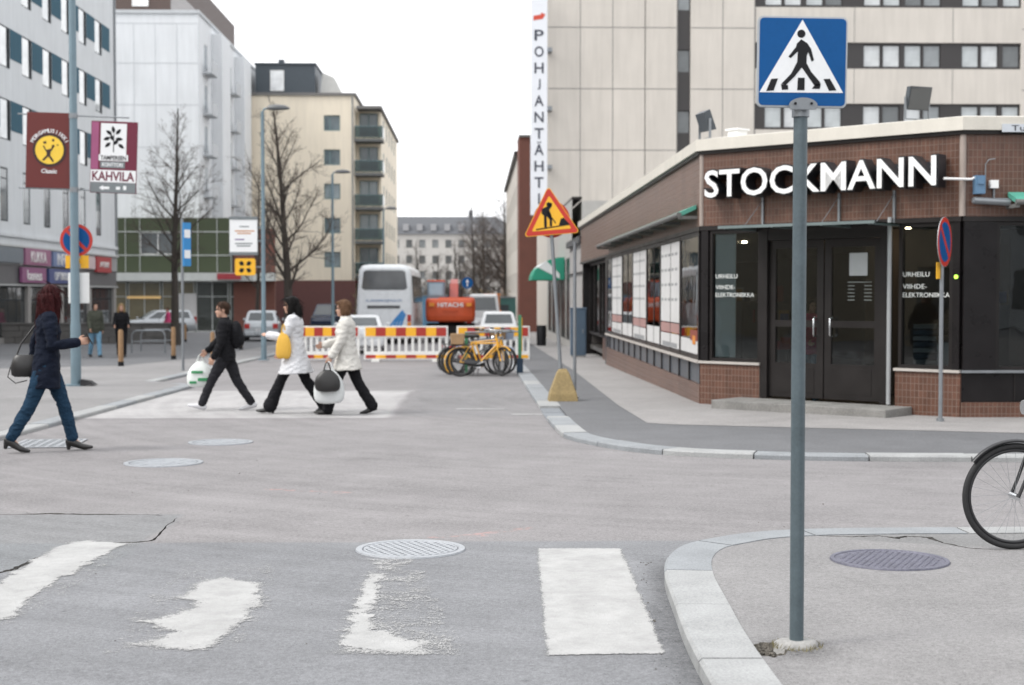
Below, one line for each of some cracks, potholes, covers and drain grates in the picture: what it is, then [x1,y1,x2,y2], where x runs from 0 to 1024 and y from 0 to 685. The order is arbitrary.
manhole cover [123,458,203,467]
crack [0,513,175,543]
manhole cover [830,549,951,571]
manhole cover [355,539,465,559]
crack [0,558,35,573]
crack [814,535,993,550]
drain grate [7,439,88,448]
